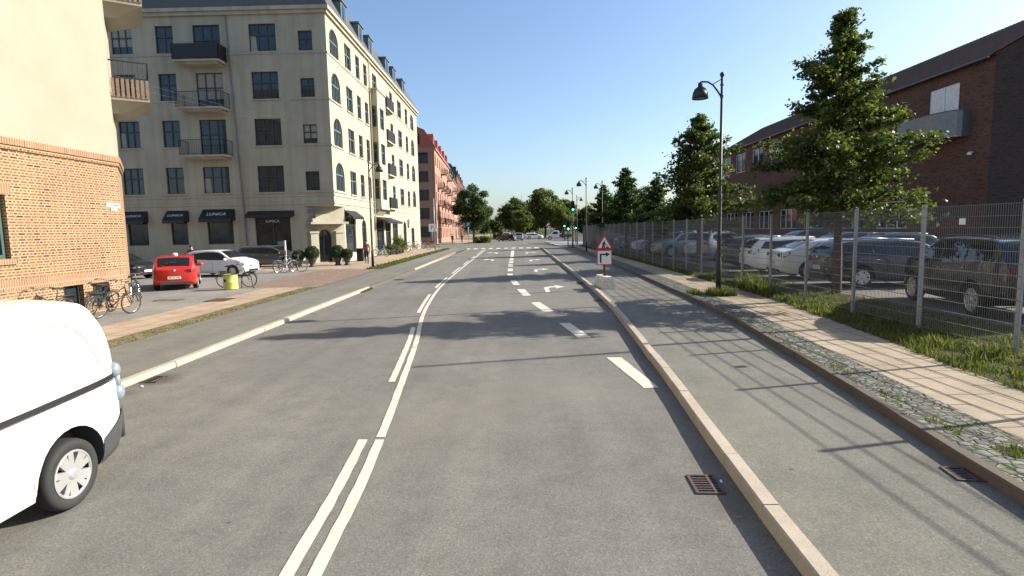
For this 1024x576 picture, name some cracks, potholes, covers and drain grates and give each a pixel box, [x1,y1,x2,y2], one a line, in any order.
drain grate [686,474,727,495]
drain grate [939,466,987,482]
